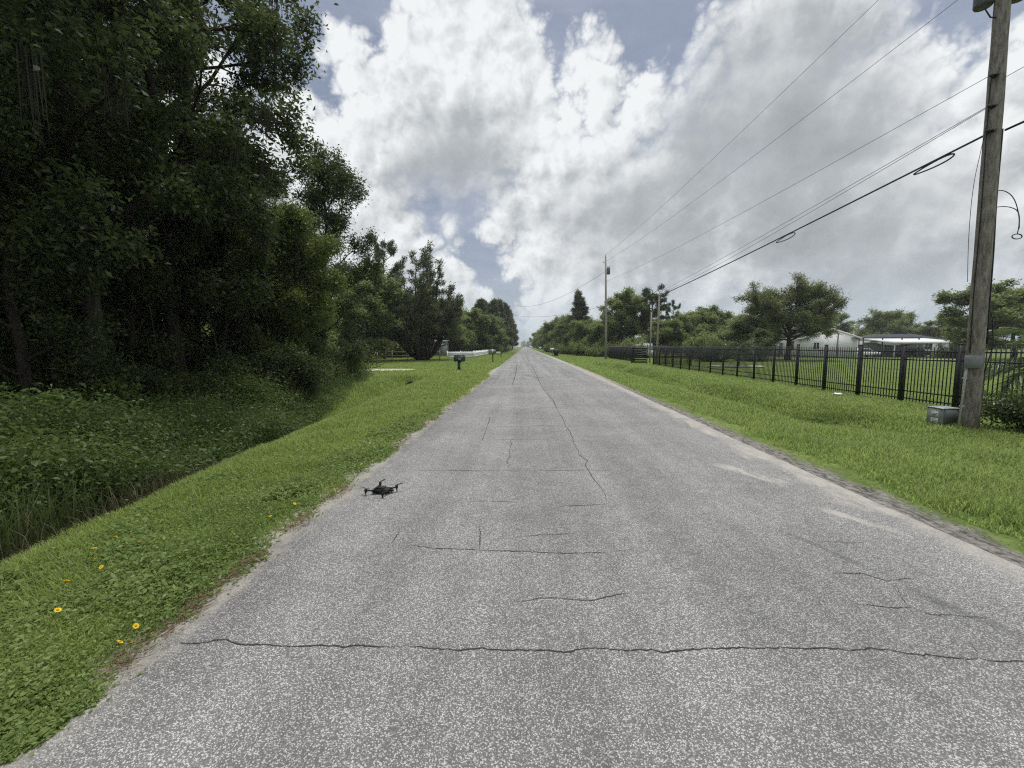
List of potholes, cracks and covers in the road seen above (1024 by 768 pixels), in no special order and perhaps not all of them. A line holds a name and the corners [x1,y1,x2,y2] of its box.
crack [393,525,631,554]
crack [840,572,987,618]
crack [526,593,624,601]
crack [181,638,1024,662]
crack [512,354,603,490]
